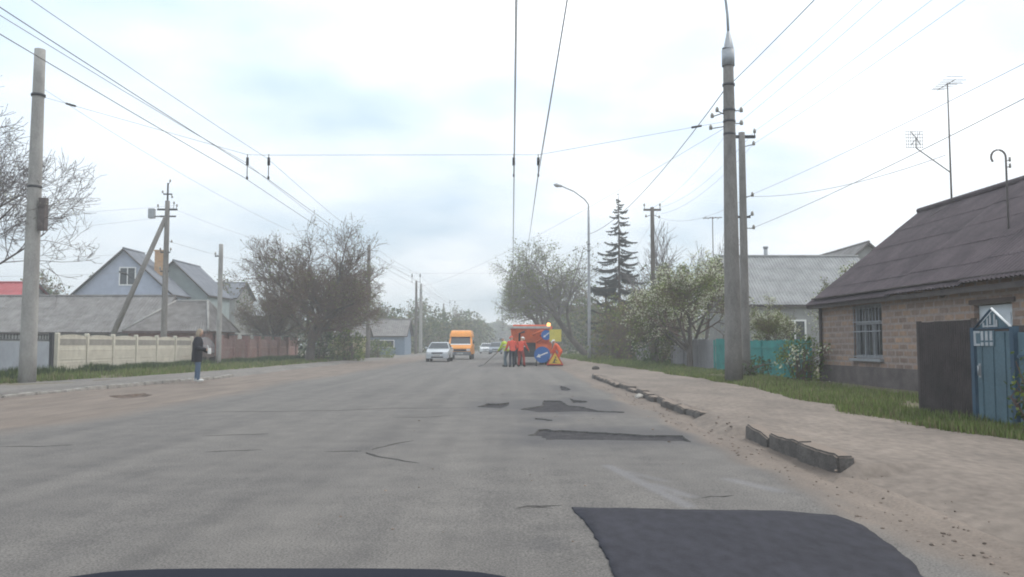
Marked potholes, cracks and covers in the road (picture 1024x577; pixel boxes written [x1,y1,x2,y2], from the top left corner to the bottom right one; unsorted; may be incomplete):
pothole [521,400,624,413]
crack [327,441,416,463]
pothole [527,429,691,442]
